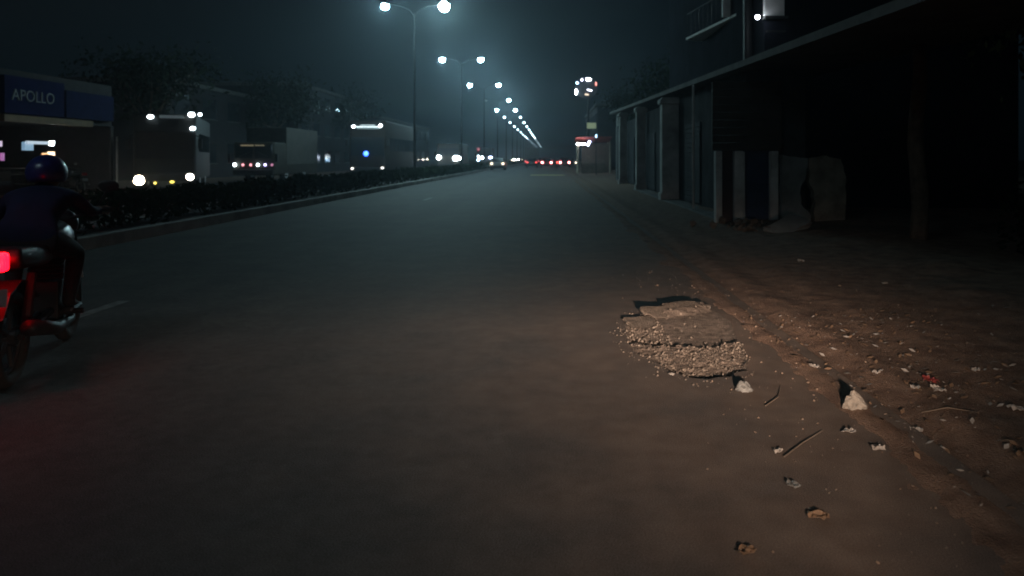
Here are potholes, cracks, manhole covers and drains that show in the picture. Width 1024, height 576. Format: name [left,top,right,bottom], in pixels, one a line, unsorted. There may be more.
pothole [609,301,753,387]
